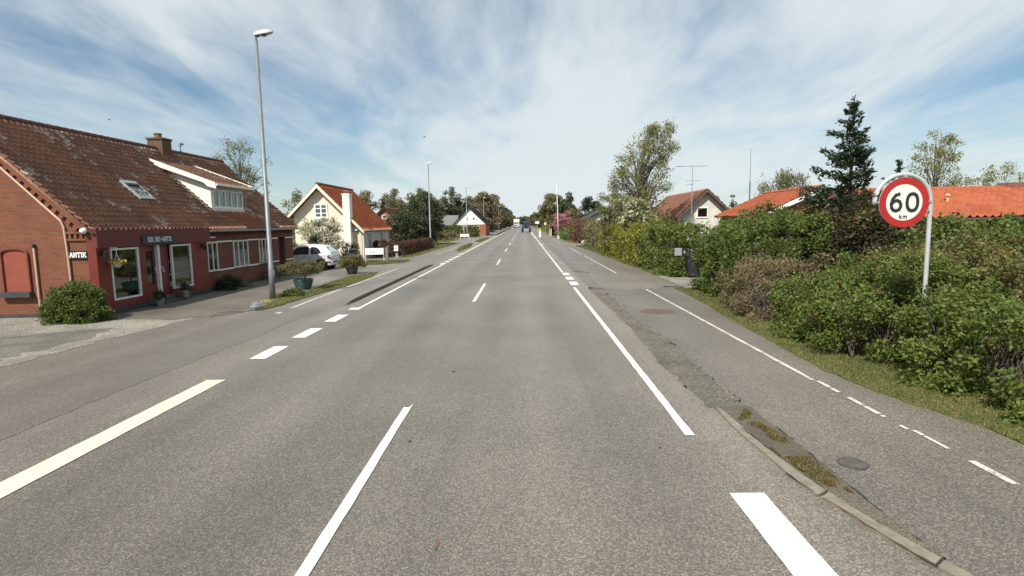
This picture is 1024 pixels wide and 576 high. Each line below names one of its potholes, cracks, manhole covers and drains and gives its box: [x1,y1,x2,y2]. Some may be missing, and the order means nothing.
manhole cover [837,457,870,470]
